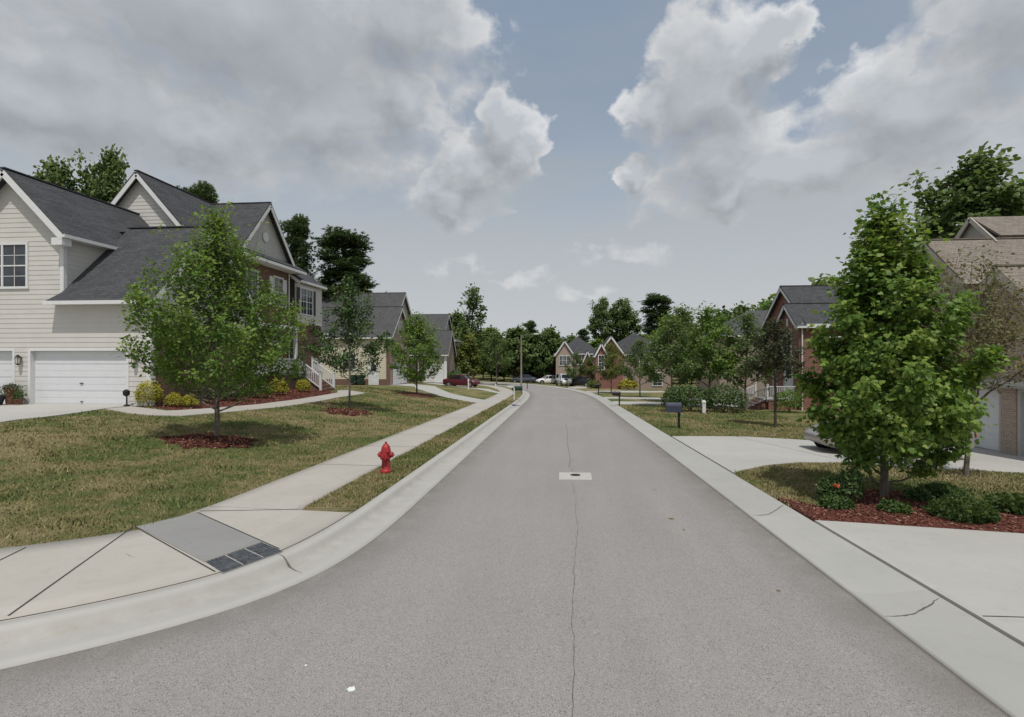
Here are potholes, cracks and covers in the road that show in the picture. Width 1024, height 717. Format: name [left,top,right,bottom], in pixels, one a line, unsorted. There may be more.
crack [897,599,937,616]
crack [571,491,579,717]
manhole cover [559,472,592,480]
